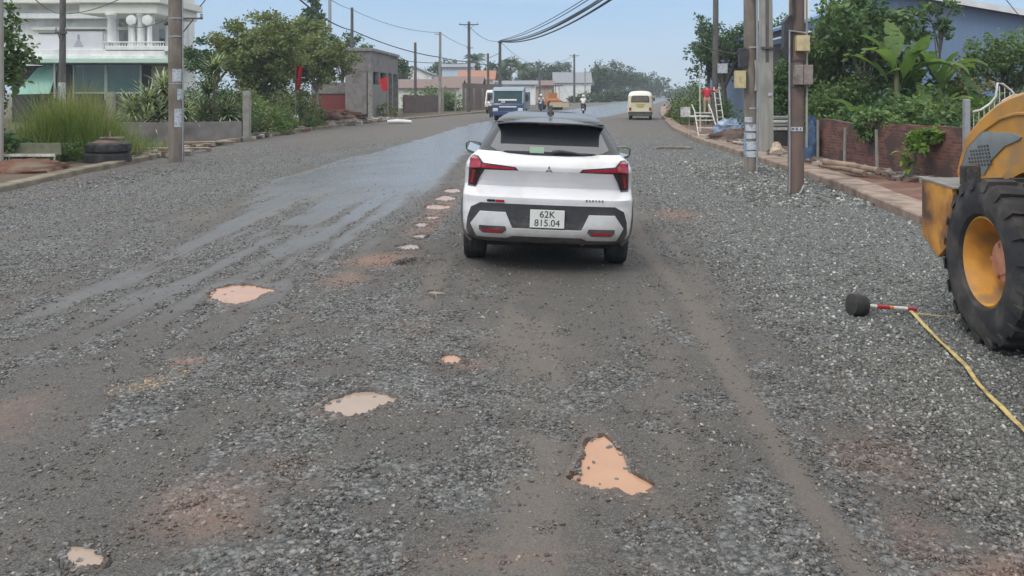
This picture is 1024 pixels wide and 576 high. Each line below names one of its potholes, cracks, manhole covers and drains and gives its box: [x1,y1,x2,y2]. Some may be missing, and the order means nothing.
pothole [389,243,423,251]
pothole [198,282,285,308]
pothole [307,386,408,420]
pothole [421,203,459,211]
pothole [56,540,112,573]
pothole [556,427,664,506]
pothole [434,353,466,367]
